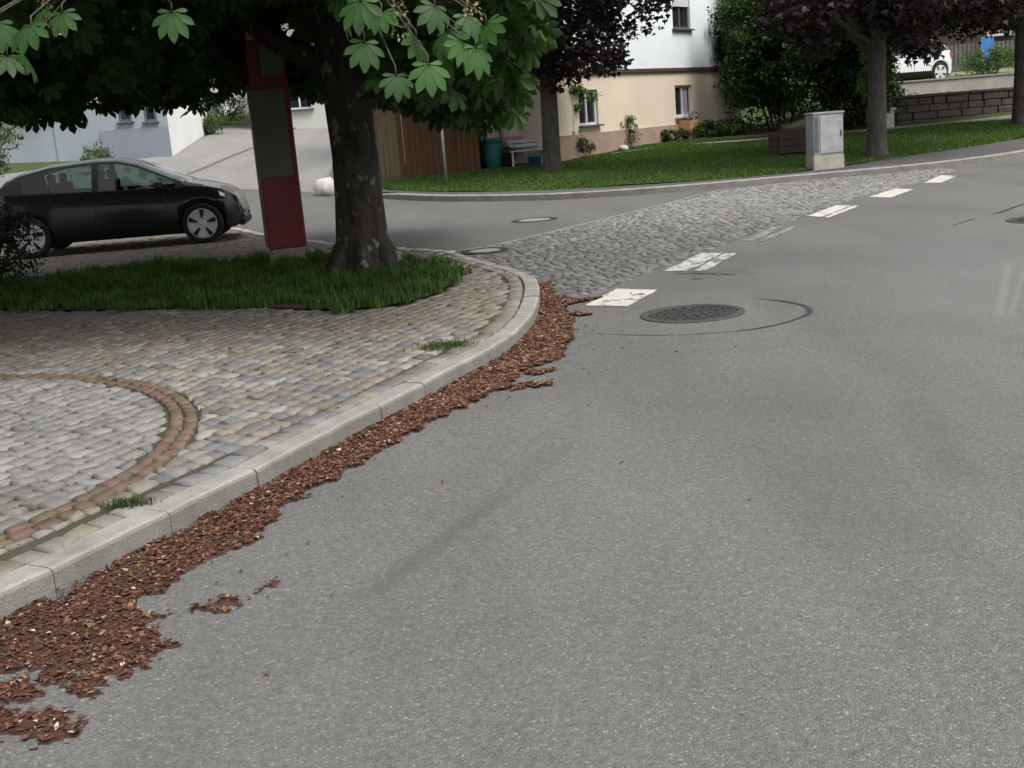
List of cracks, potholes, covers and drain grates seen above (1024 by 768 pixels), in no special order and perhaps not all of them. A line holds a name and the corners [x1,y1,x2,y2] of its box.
manhole cover [640,304,746,323]
manhole cover [460,247,509,255]
